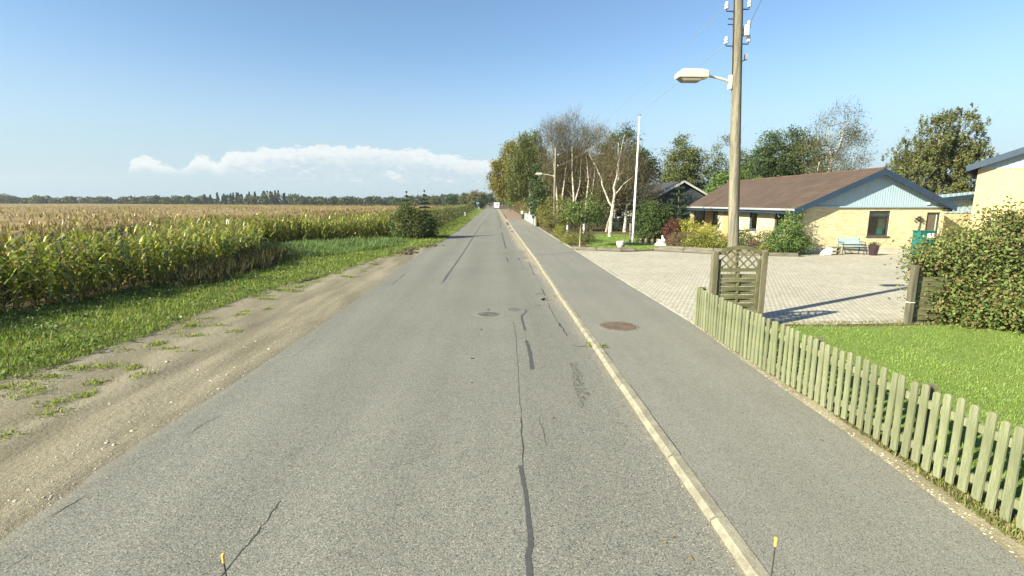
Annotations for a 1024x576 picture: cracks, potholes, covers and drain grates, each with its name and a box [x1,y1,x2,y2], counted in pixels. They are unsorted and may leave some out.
manhole cover [598,321,640,331]
crack [221,431,336,576]
crack [513,321,545,463]
crack [504,252,583,347]
